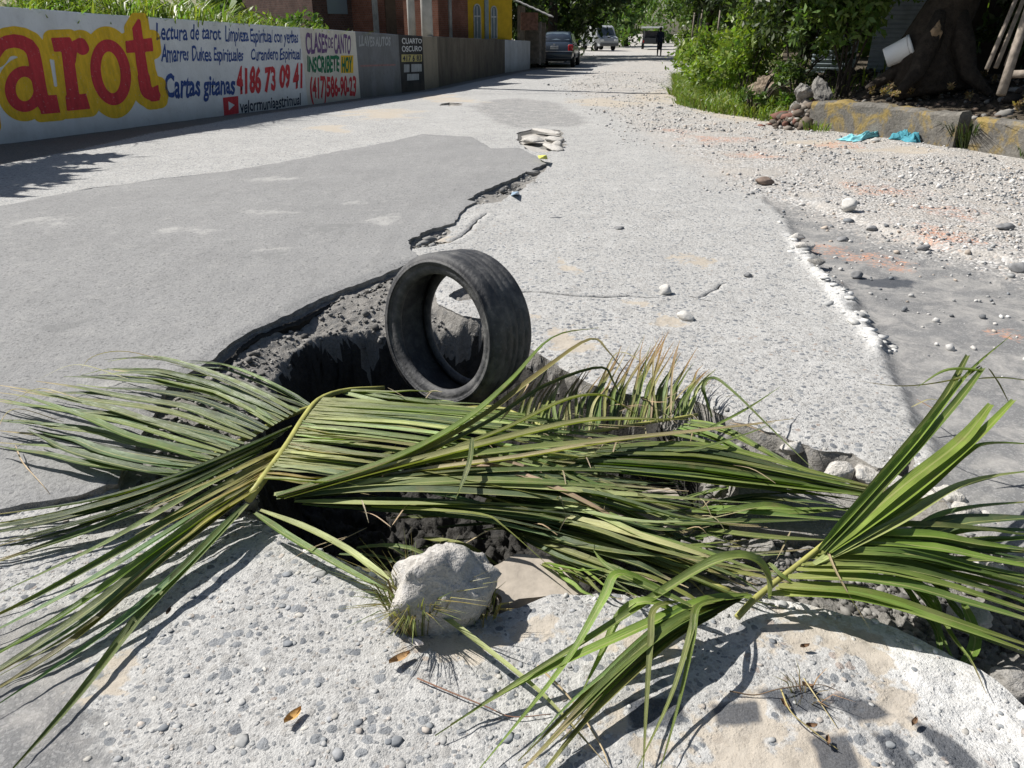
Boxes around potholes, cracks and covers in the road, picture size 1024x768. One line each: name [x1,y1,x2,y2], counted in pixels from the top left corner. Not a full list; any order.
crack [520,288,664,303]
crack [436,212,499,244]
pothole [121,274,1024,706]
